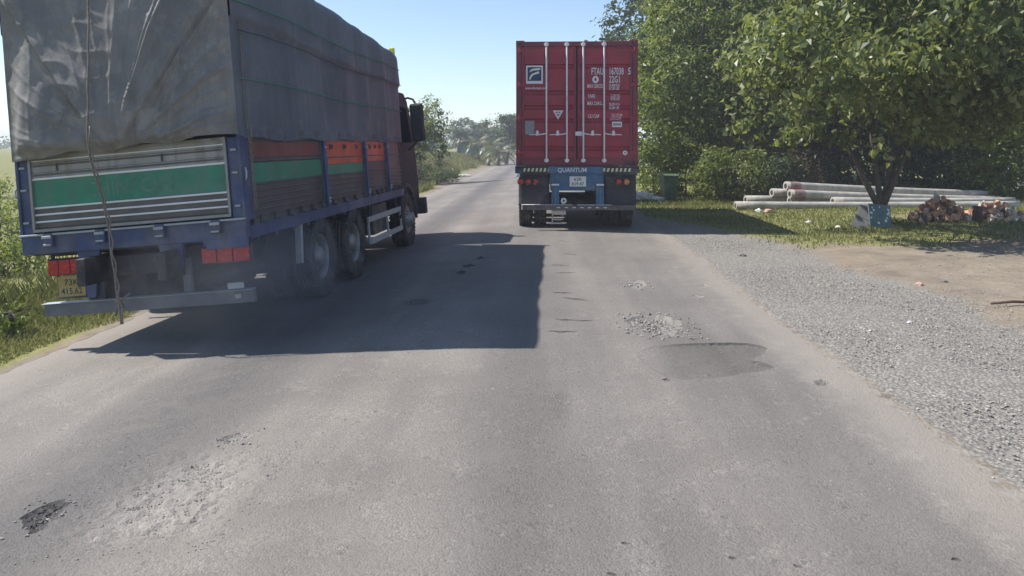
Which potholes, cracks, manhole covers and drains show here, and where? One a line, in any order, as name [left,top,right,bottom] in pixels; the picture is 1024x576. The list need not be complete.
pothole [8,440,296,565]
pothole [613,312,710,340]
crack [553,292,588,301]
crack [553,319,593,333]
pothole [619,280,654,290]
pothole [635,343,774,380]
pothole [396,297,438,306]
